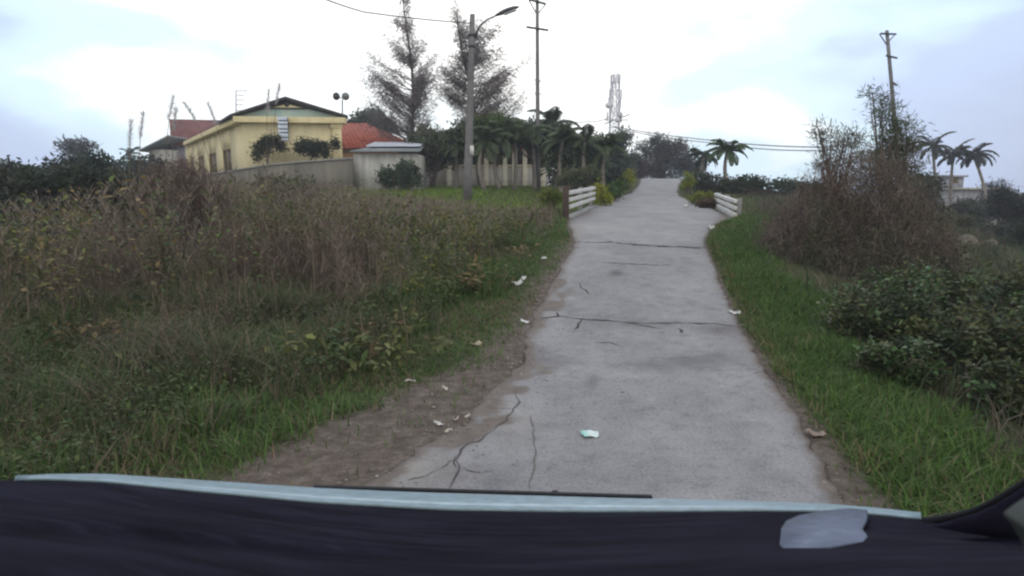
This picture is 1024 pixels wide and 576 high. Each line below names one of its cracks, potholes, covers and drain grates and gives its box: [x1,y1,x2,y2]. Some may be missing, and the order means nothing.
crack [578,241,699,265]
crack [409,388,537,489]
crack [543,312,733,347]
